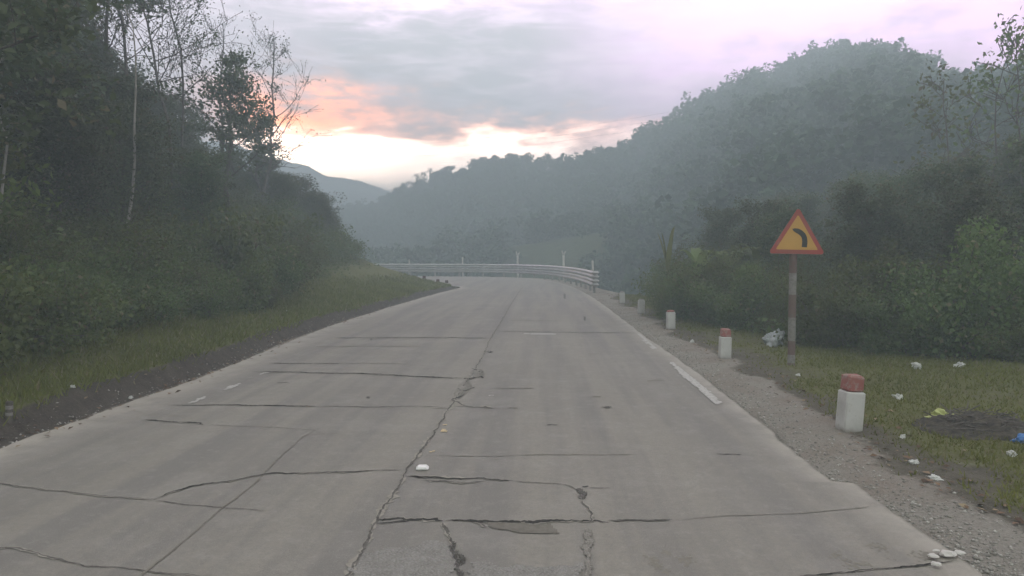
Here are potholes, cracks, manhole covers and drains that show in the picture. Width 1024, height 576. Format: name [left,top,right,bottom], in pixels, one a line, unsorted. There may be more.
crack [802,560,954,576]
crack [0,287,670,576]
